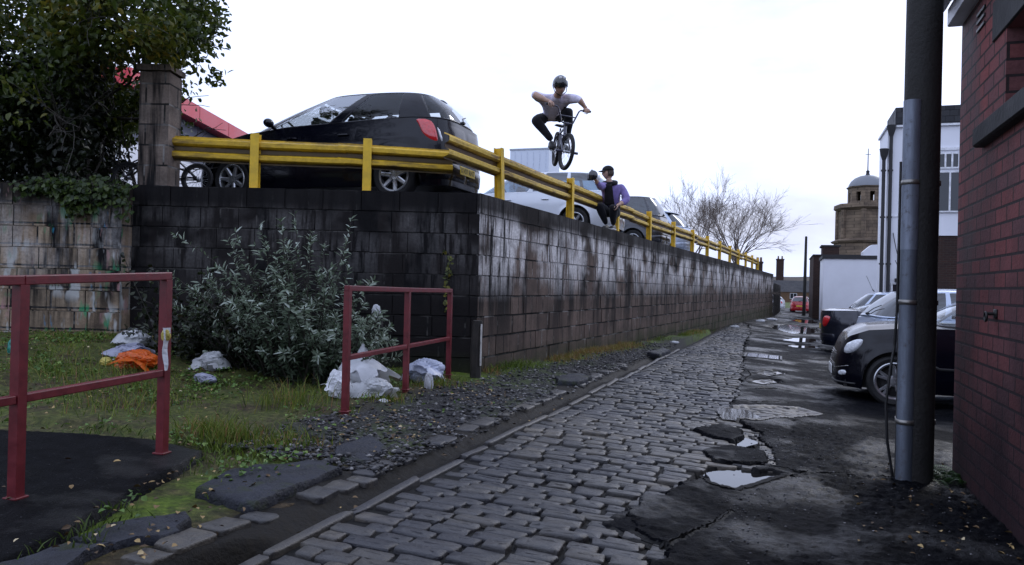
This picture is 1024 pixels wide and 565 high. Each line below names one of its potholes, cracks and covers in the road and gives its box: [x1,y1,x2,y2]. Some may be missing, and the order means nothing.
crack [607,510,735,550]
pothole [730,434,762,449]
pothole [746,377,784,385]
pothole [698,467,791,490]
